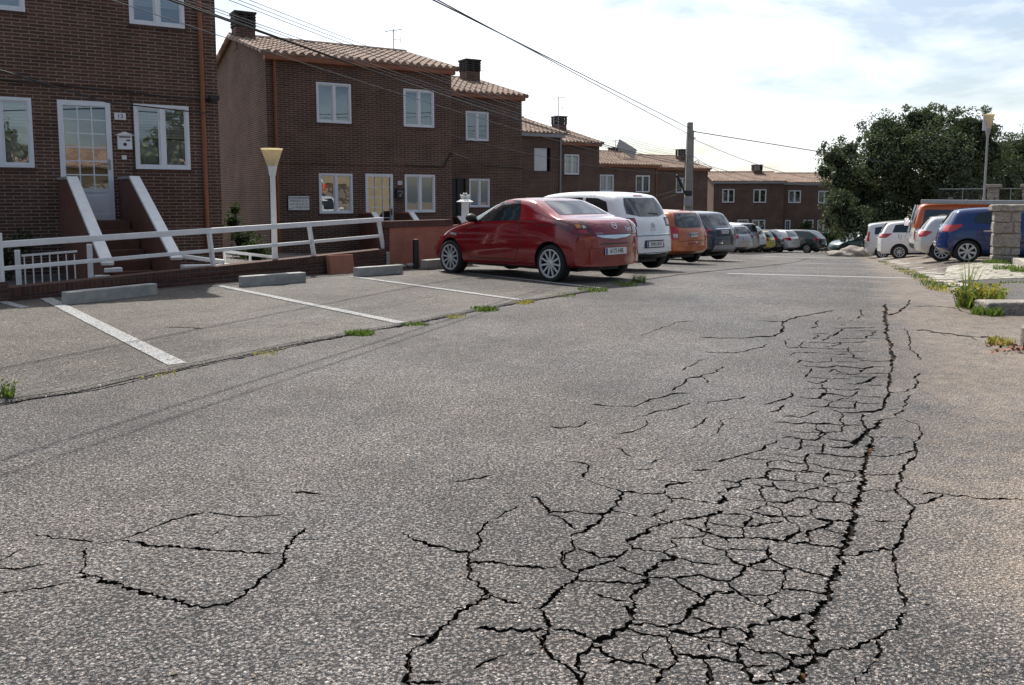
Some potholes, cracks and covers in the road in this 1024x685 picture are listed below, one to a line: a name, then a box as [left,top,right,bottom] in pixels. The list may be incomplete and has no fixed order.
crack [401,300,1022,685]
crack [0,511,328,609]
